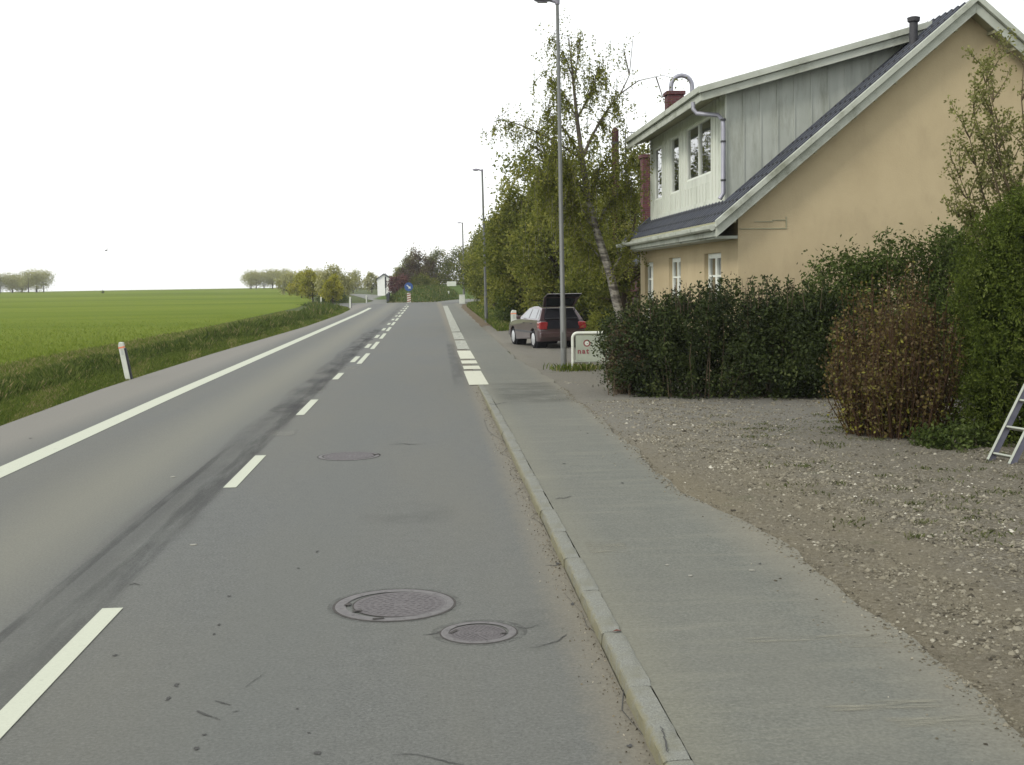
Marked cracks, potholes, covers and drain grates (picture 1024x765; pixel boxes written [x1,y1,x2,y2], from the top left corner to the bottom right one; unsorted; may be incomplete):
manhole cover [439,621,518,644]
manhole cover [317,451,381,461]
manhole cover [332,589,456,622]
